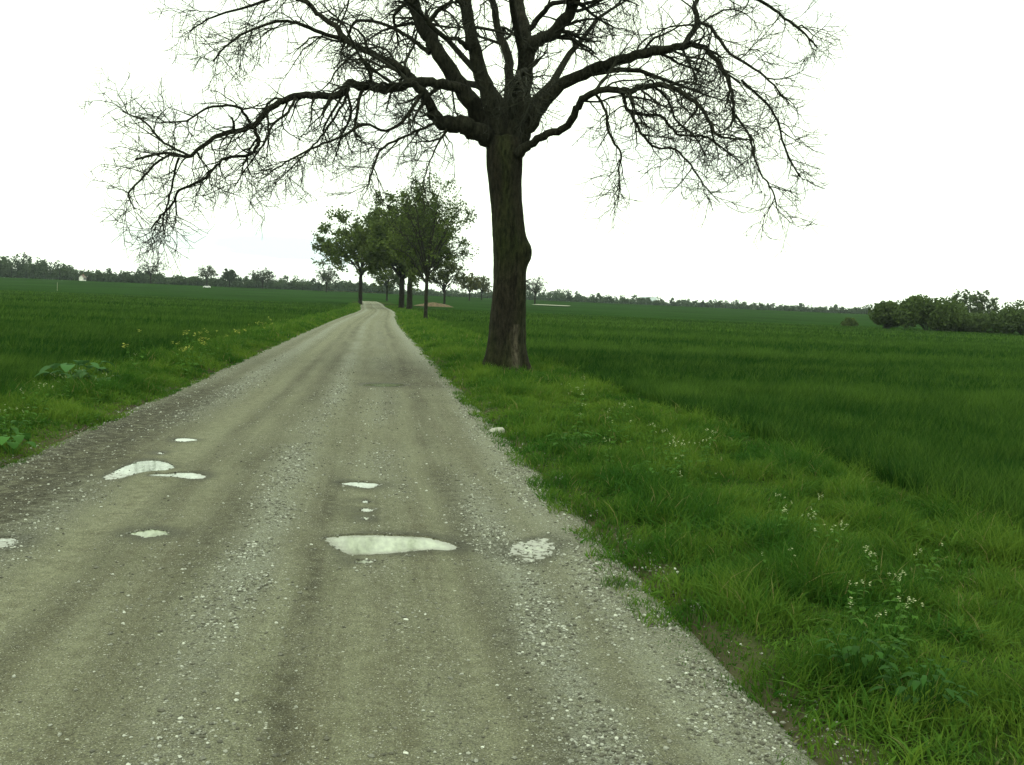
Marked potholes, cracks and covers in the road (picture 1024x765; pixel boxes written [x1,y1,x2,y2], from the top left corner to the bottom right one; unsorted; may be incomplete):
pothole [322,533,460,555]
pothole [507,537,558,562]
pothole [127,528,171,538]
pothole [101,459,176,480]
pothole [0,536,21,548]
